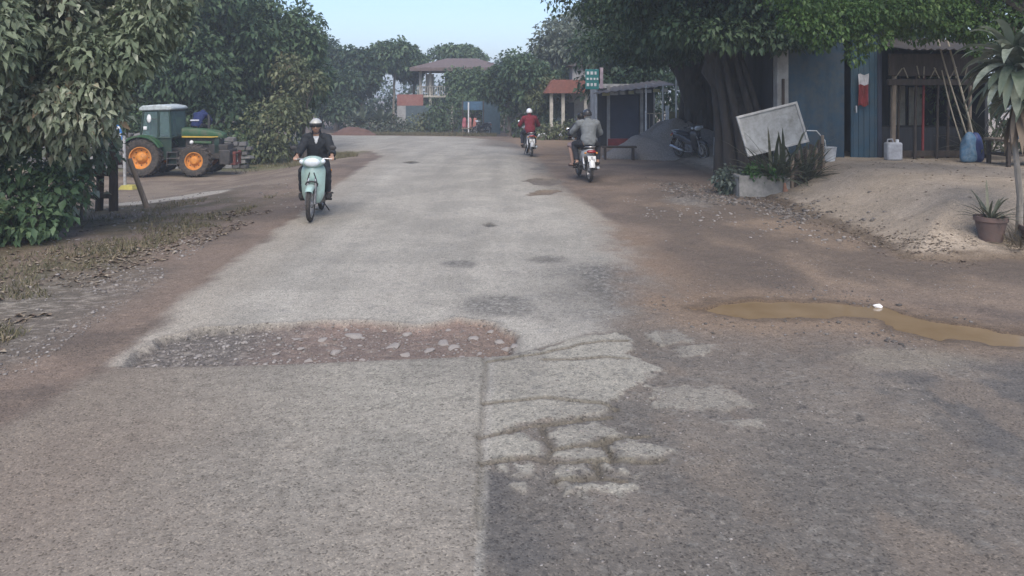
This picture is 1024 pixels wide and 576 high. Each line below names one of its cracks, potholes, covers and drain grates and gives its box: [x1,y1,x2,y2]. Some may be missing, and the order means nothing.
crack [474,340,667,530]
pothole [120,317,520,368]
pothole [685,298,1024,345]
pothole [521,178,568,186]
